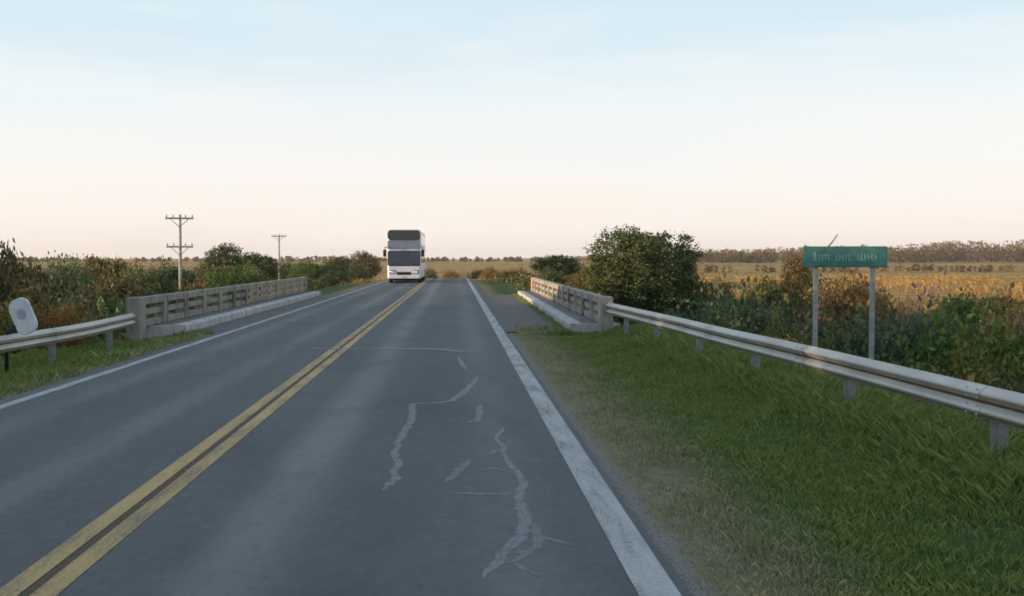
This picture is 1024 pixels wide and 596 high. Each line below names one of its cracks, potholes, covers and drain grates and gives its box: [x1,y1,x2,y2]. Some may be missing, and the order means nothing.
crack [302,348,574,579]
